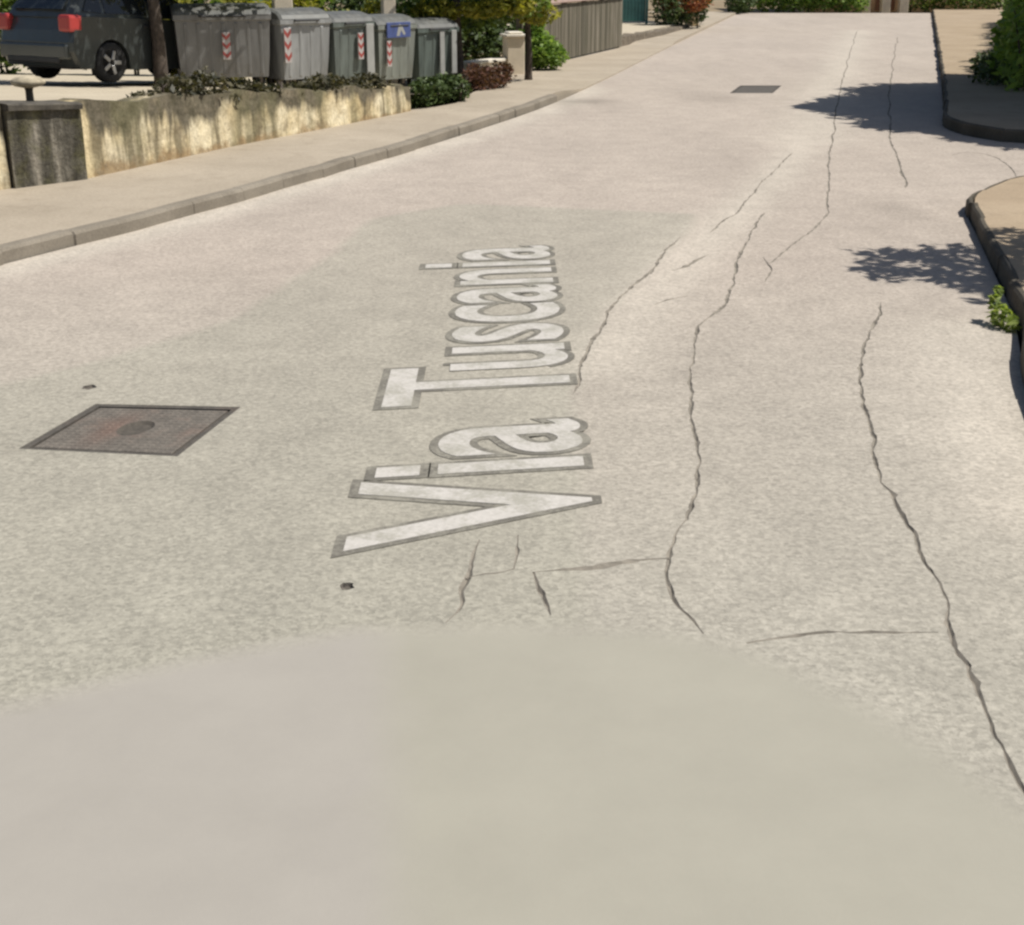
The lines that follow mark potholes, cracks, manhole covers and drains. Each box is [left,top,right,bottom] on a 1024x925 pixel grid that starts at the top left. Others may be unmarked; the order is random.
manhole cover [730,85,782,93]
crack [445,31,1024,794]
manhole cover [19,404,240,456]
